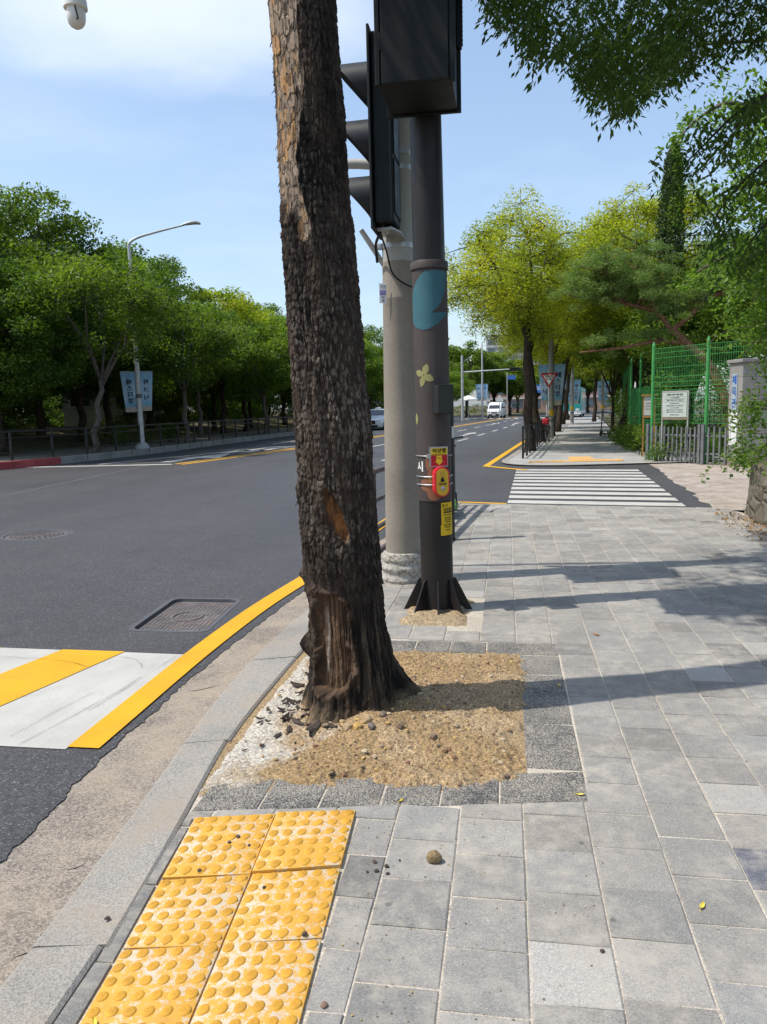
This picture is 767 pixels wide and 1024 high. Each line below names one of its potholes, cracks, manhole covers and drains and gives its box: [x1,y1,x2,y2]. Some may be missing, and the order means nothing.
manhole cover [129,597,240,633]
manhole cover [0,529,73,541]
